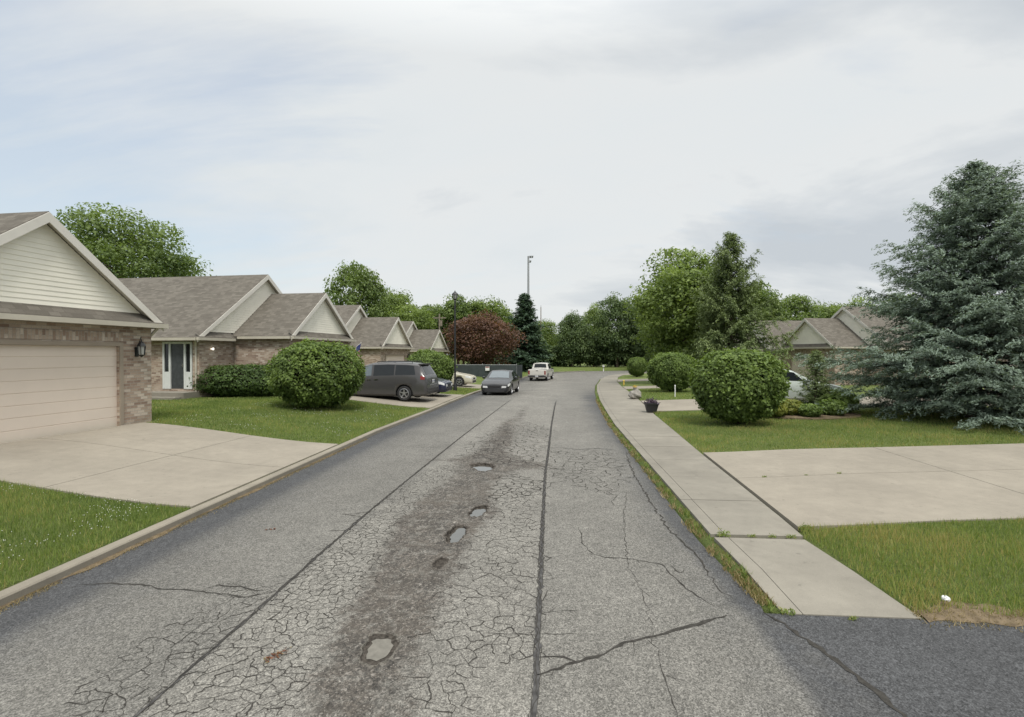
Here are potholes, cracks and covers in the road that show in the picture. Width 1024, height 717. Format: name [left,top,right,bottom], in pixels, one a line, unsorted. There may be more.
crack [65,464,462,717]
pothole [443,524,470,544]
crack [404,422,727,717]
pothole [467,504,490,518]
pothole [432,556,449,570]
pothole [357,631,402,668]
pothole [469,462,497,472]
